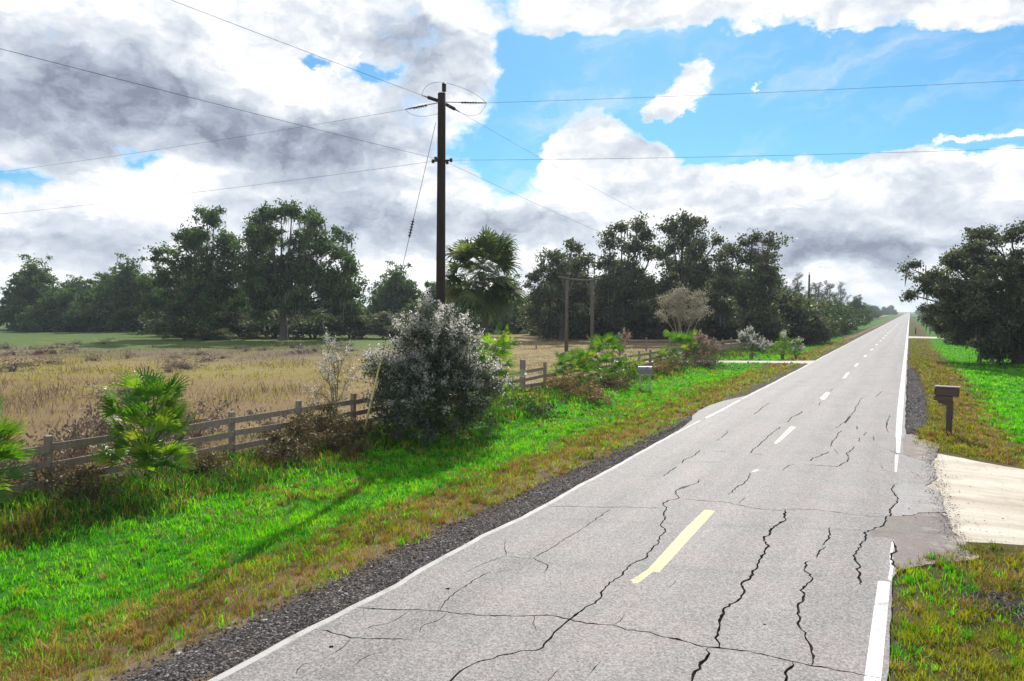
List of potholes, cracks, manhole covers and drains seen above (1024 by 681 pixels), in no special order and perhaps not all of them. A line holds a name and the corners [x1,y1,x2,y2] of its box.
crack [296,630,414,674]
crack [358,398,922,681]
